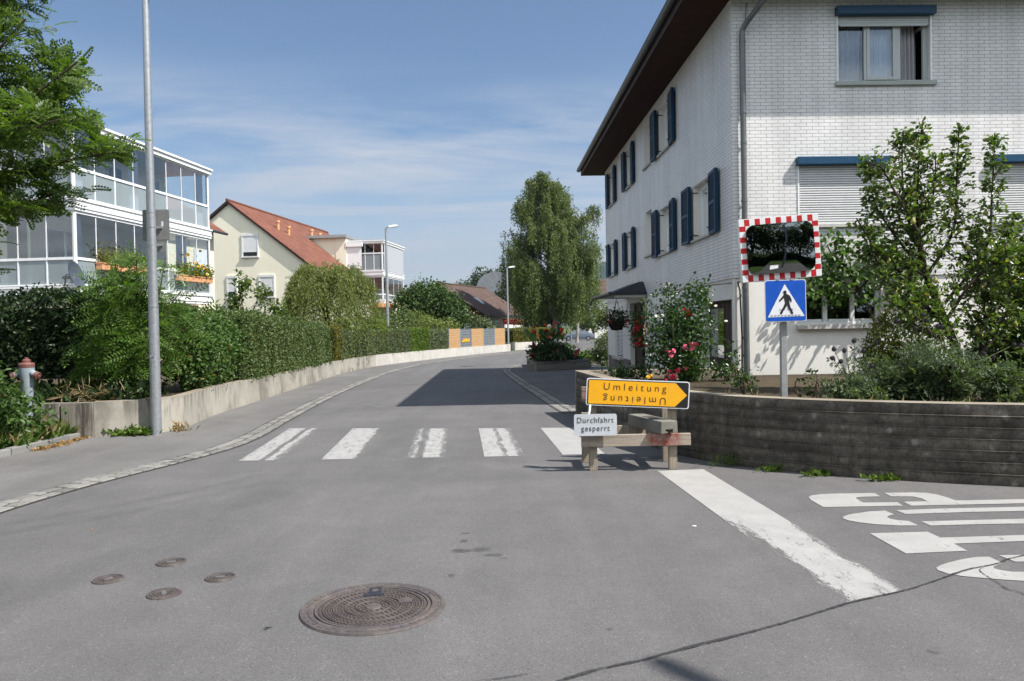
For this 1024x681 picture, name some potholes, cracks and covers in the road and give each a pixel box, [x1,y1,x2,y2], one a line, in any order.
manhole cover [146,587,182,600]
manhole cover [299,583,445,636]
manhole cover [204,572,236,582]
manhole cover [155,557,186,567]
manhole cover [91,574,125,585]
